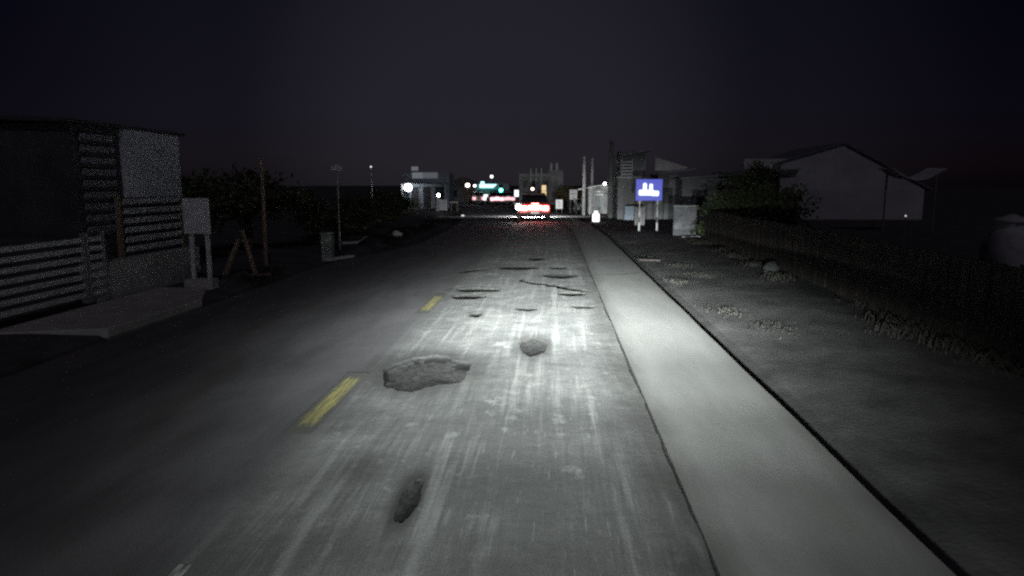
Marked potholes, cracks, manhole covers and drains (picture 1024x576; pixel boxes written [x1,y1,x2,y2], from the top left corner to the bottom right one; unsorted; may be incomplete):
pothole [394,479,424,523]
pothole [520,338,547,357]
pothole [383,355,472,392]
